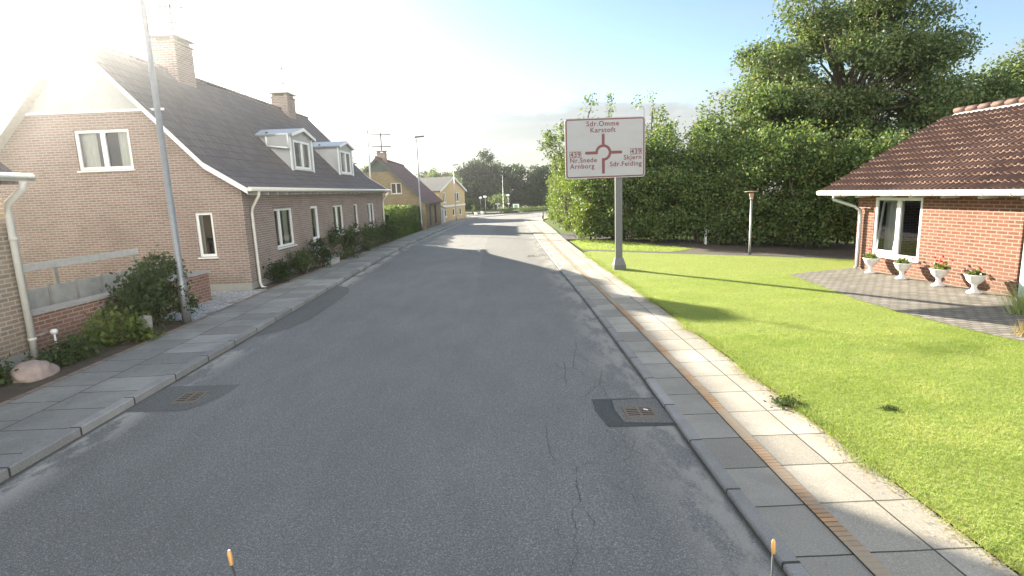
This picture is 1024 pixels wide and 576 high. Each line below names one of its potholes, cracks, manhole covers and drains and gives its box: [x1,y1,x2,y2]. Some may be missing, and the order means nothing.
crack [555,343,608,397]
crack [557,463,605,573]
